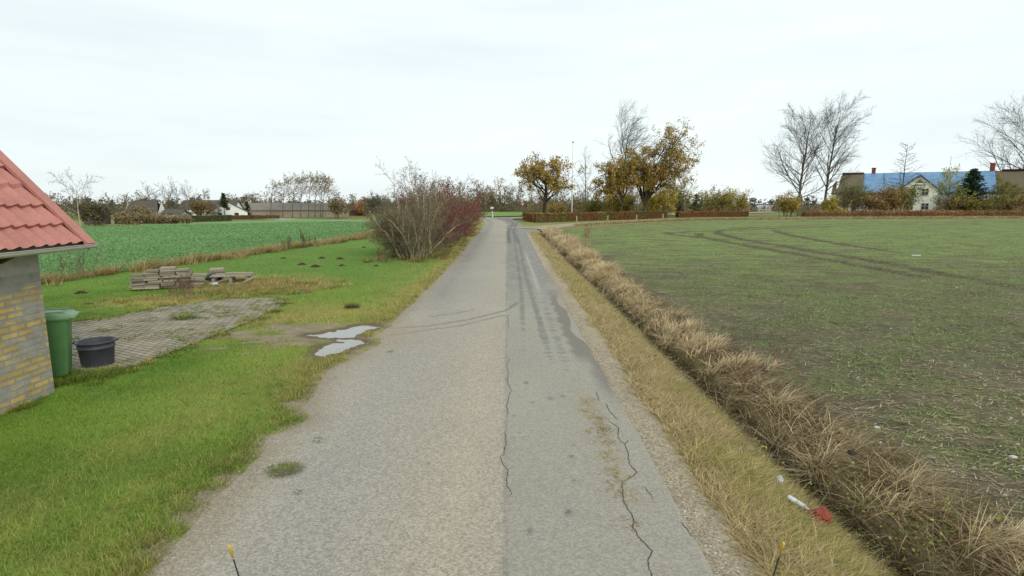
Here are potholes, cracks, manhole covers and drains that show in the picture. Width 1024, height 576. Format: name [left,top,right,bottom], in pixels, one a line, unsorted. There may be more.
crack [596,392,653,576]
crack [500,360,512,495]
